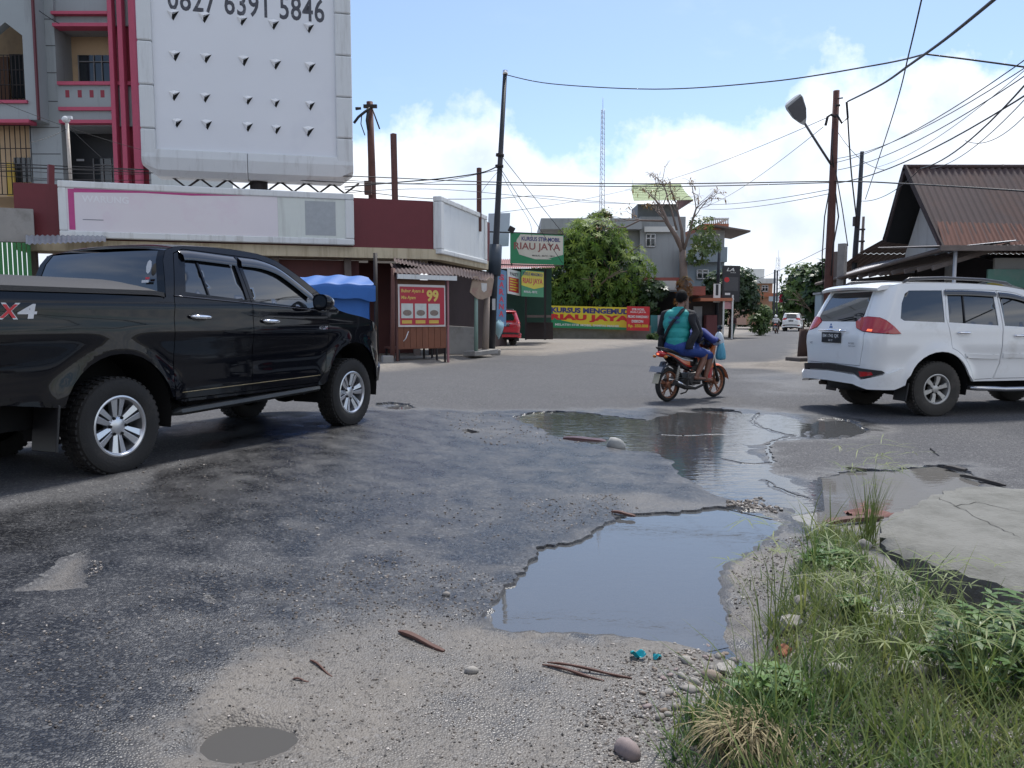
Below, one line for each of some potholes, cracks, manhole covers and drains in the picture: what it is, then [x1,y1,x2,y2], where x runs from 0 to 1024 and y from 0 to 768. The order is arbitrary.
pothole [481,506,792,644]
pothole [804,417,869,440]
pothole [375,402,415,410]
crack [721,413,810,499]
pothole [691,408,745,419]
pothole [808,464,985,501]
pothole [511,410,662,452]
